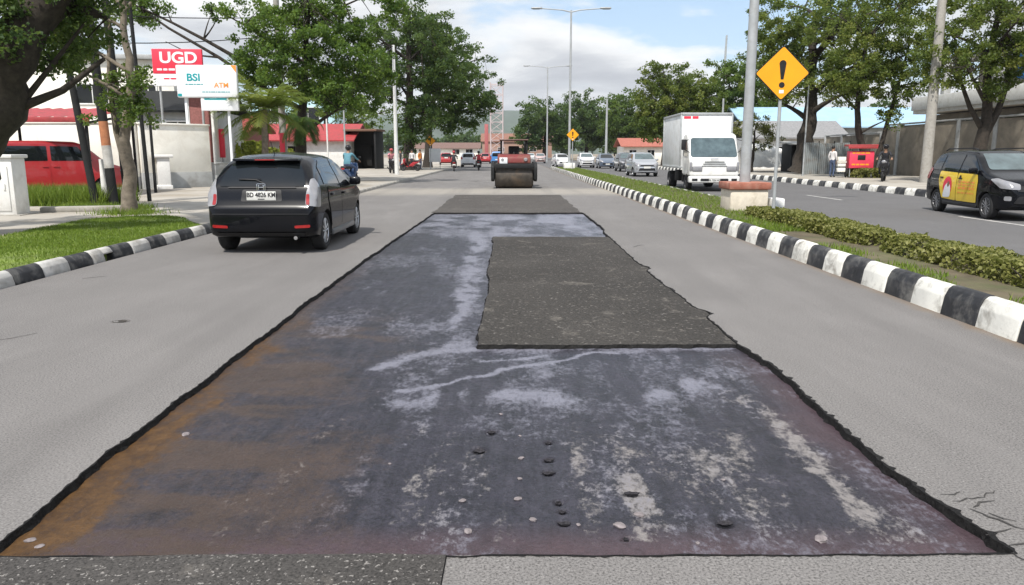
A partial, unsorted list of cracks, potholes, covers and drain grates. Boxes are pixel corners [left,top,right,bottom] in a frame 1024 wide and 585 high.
crack [954,490,1024,560]
